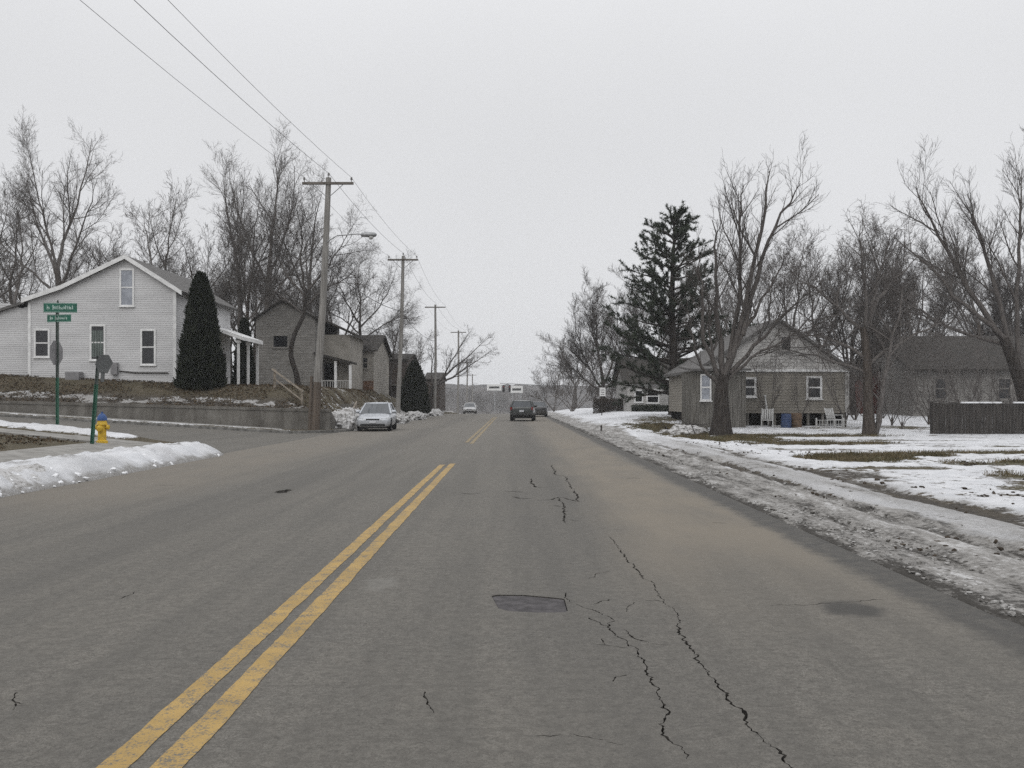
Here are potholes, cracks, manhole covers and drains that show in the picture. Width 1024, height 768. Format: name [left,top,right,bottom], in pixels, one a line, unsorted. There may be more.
crack [564,593,689,759]
crack [610,538,792,768]
crack [506,465,579,523]
